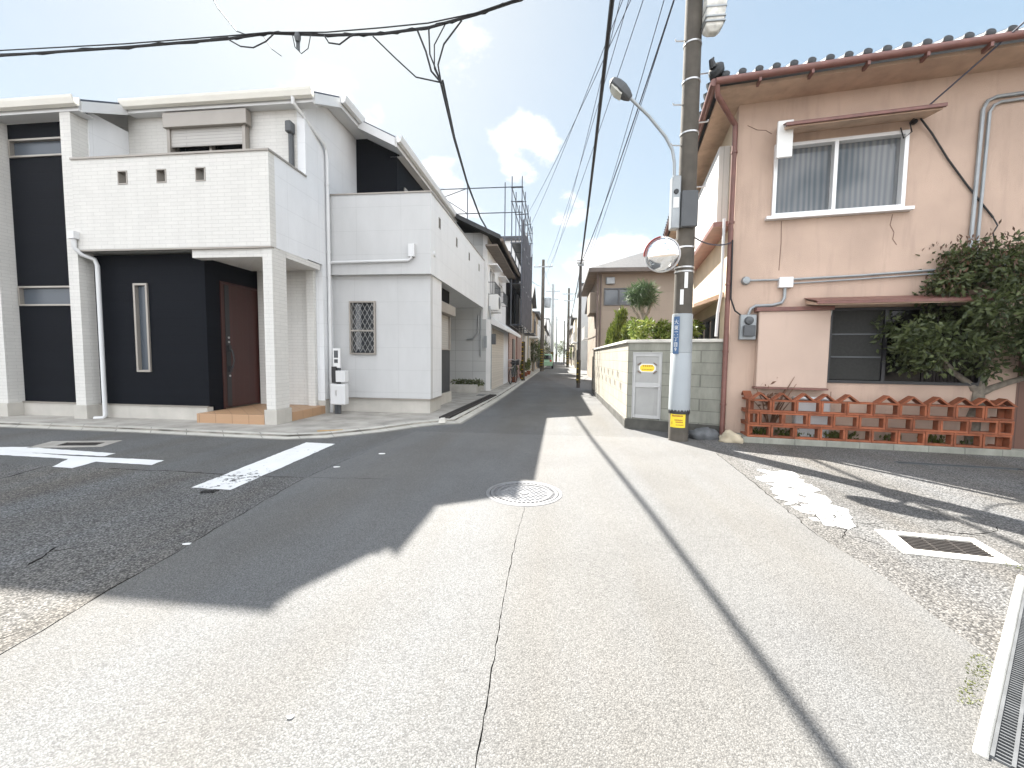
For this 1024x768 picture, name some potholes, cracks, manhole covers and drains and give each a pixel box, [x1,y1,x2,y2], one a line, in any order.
manhole cover [486,481,563,507]
drain grate [27,440,122,448]
drain grate [439,394,497,418]
crack [28,544,78,565]
crack [475,507,525,768]
drain grate [875,529,1021,566]
crack [773,482,904,547]
